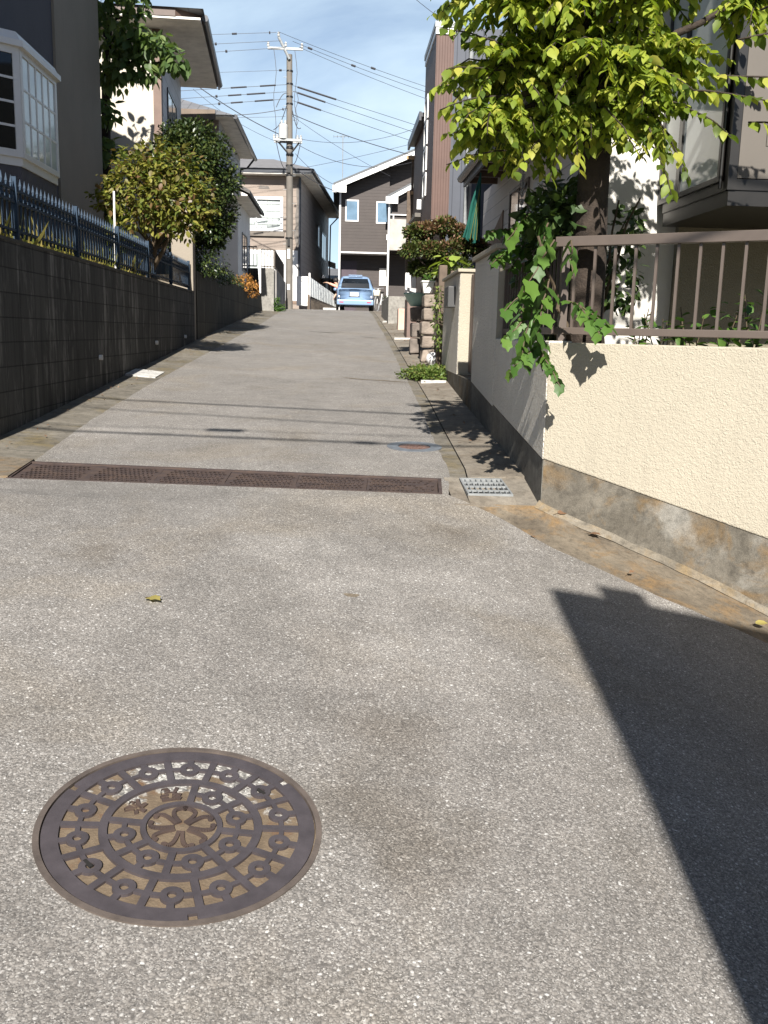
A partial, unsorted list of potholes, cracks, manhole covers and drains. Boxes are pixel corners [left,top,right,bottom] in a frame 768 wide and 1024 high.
drain grate [366,477,438,493]
drain grate [459,478,513,497]
drain grate [84,466,164,482]
drain grate [224,472,299,487]
drain grate [153,469,232,485]
manhole cover [387,441,442,452]
drain grate [13,463,98,479]
drain grate [295,475,368,490]
manhole cover [32,747,322,927]
